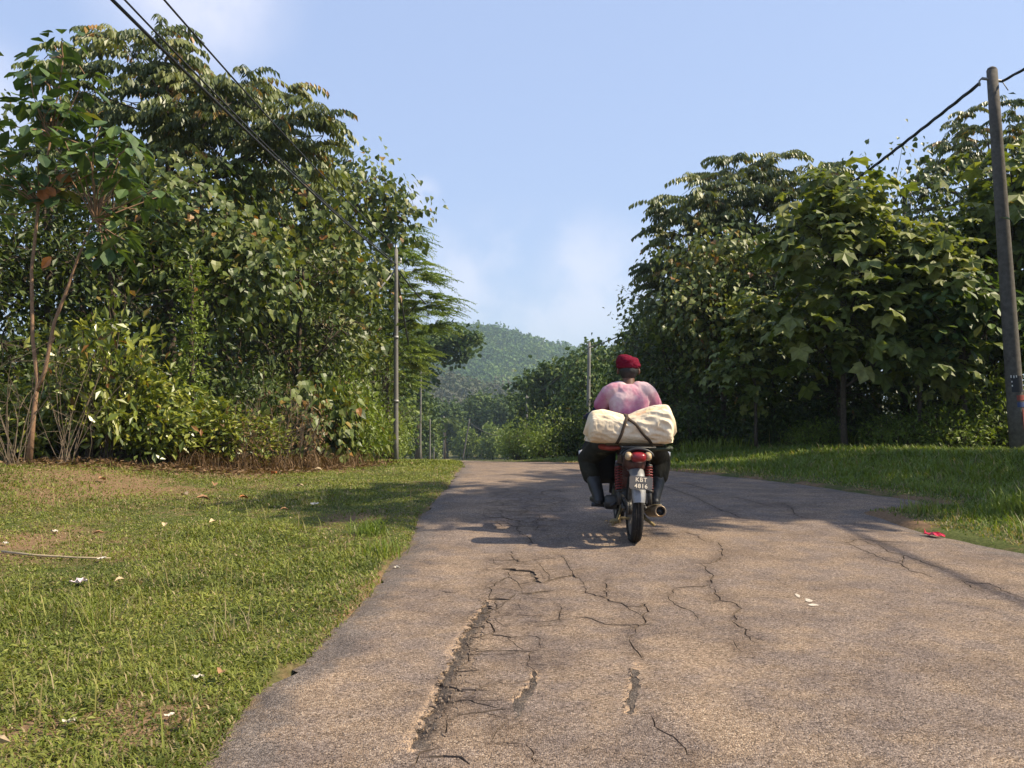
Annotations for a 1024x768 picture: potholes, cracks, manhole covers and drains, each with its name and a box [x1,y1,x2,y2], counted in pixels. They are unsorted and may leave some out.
crack [651,716,687,754]
crack [845,539,943,575]
crack [410,489,649,768]
